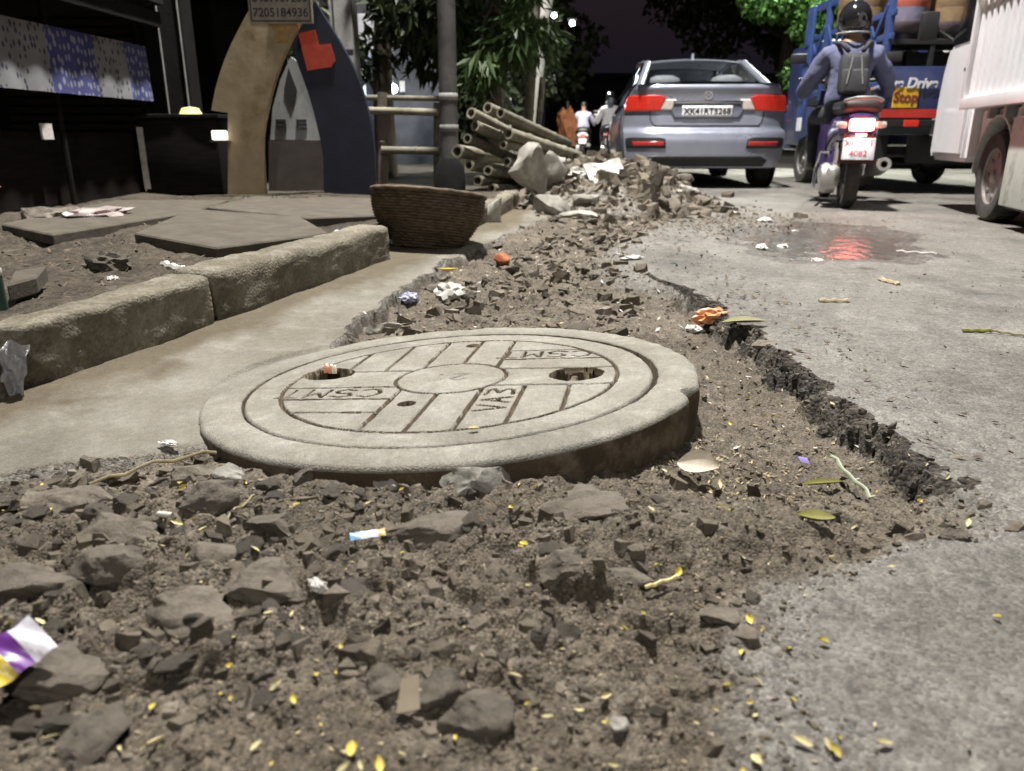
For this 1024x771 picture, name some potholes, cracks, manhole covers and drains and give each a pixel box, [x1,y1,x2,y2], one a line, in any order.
pothole [0,215,1021,771]
manhole cover [198,327,700,490]
